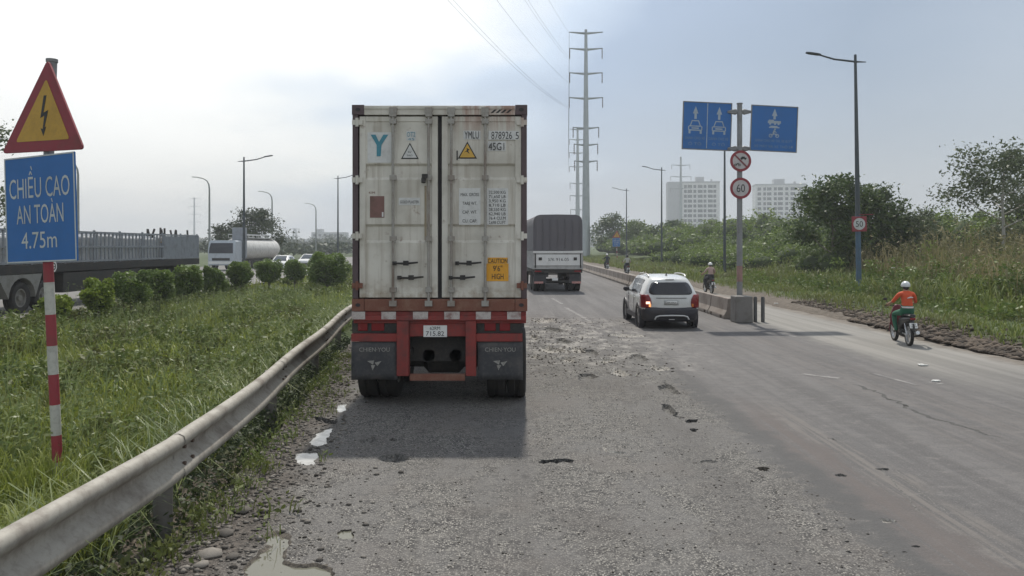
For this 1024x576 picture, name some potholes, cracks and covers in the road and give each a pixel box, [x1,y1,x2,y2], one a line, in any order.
pothole [337,529,354,539]
pothole [309,426,335,446]
crack [853,384,998,437]
pothole [294,452,319,465]
pothole [378,453,408,463]
pothole [661,404,678,416]
pothole [243,530,336,576]
pothole [577,373,599,381]
pothole [657,382,681,395]
